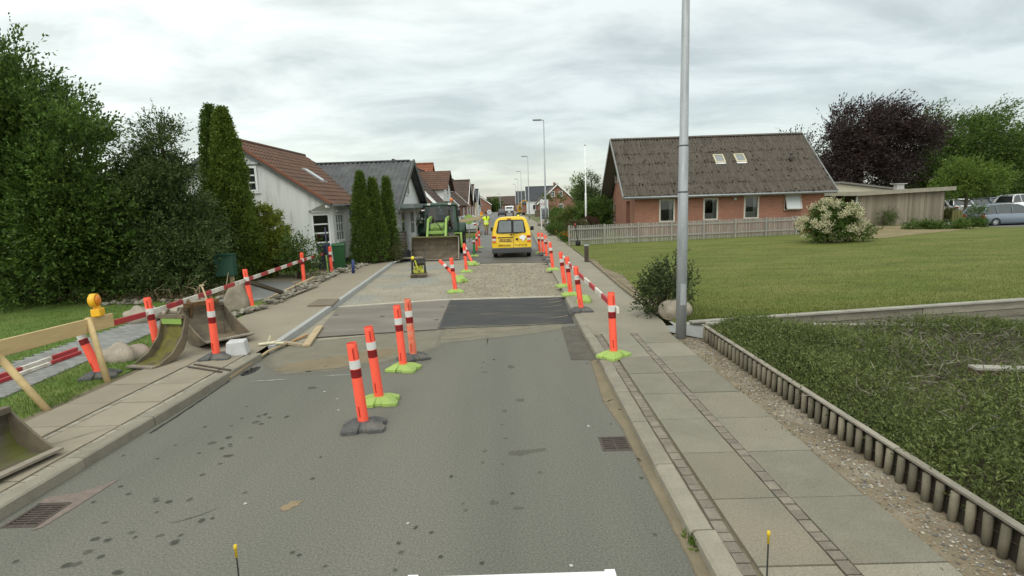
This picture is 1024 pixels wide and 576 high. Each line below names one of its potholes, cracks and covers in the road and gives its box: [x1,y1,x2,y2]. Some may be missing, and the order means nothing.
drain grate [598,436,633,452]
drain grate [0,503,71,528]
